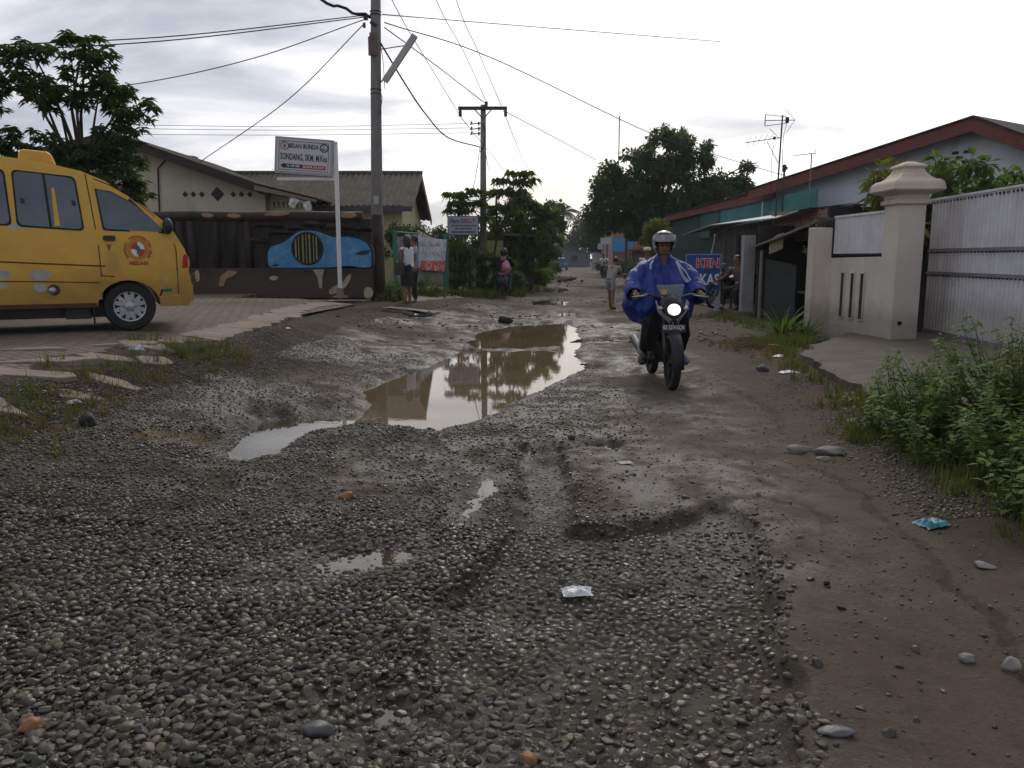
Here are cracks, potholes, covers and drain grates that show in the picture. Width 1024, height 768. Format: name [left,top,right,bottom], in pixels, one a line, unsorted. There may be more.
pothole [522,298,577,306]
pothole [338,319,598,431]
pothole [202,404,377,462]
